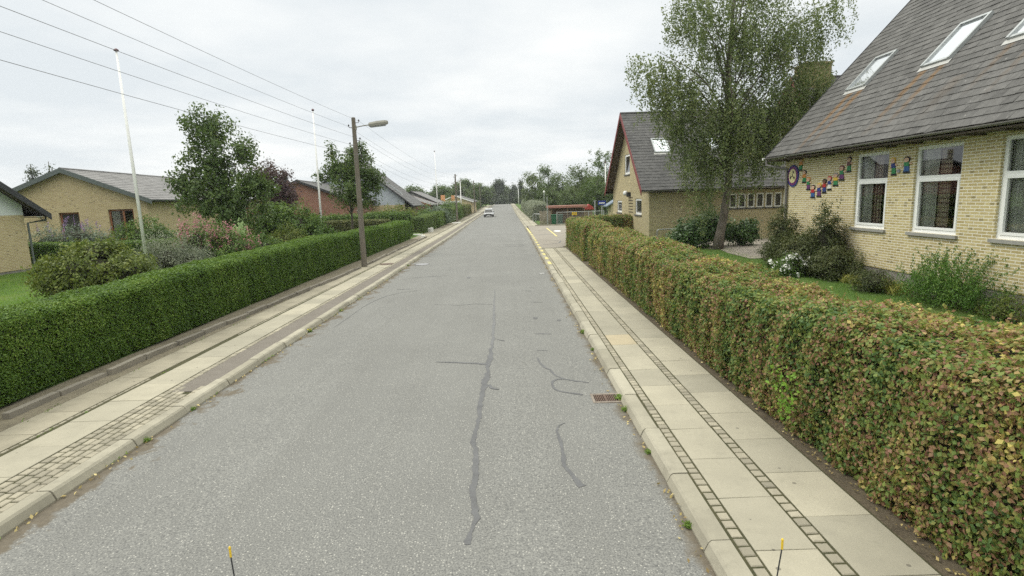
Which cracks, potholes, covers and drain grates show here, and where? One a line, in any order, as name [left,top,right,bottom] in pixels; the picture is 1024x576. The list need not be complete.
drain grate [590,393,621,403]
